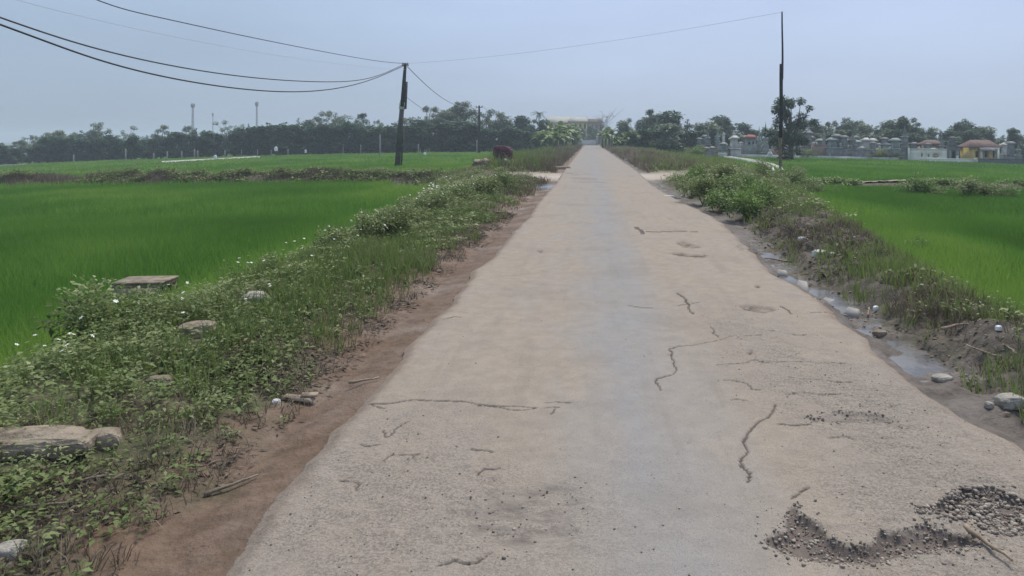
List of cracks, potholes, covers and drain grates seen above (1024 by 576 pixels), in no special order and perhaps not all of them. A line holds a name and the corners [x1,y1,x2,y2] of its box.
crack [469,448,501,476]
pothole [804,409,900,425]
crack [653,291,858,499]
crack [358,399,572,462]
crack [633,226,698,234]
crack [337,479,363,491]
pothole [674,240,705,249]
crack [434,552,501,567]
pothole [755,499,993,569]
pothole [906,484,1024,541]
pothole [735,302,779,313]
